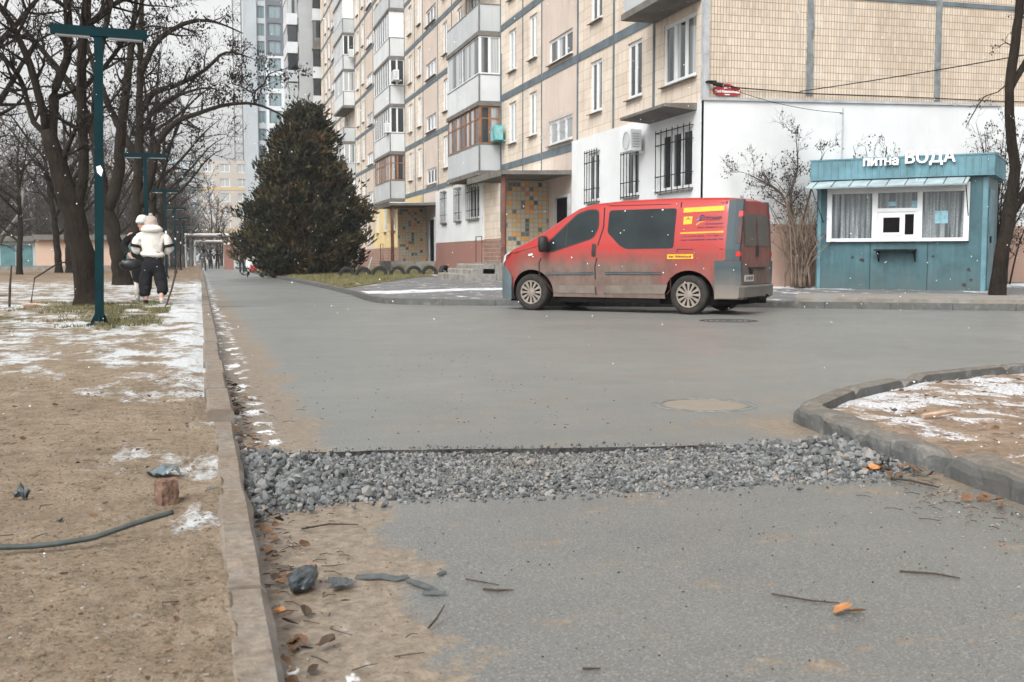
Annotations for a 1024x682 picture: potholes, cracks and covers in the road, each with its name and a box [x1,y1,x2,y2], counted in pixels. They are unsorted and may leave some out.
manhole cover [651,398,758,412]
pothole [252,444,874,519]
